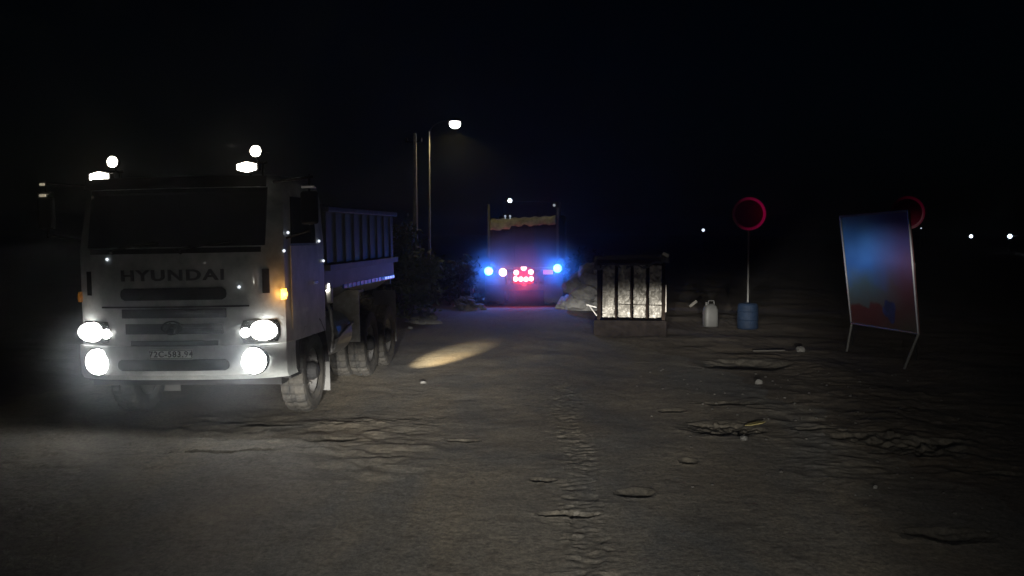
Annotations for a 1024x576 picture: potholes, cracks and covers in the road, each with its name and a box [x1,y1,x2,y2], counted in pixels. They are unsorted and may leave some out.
pothole [693,358,791,371]
pothole [612,487,659,499]
pothole [897,527,1001,546]
pothole [674,418,768,438]
crack [163,447,316,455]
crack [290,417,447,426]
pothole [535,510,604,518]
pothole [677,457,700,465]
crack [806,423,976,460]
